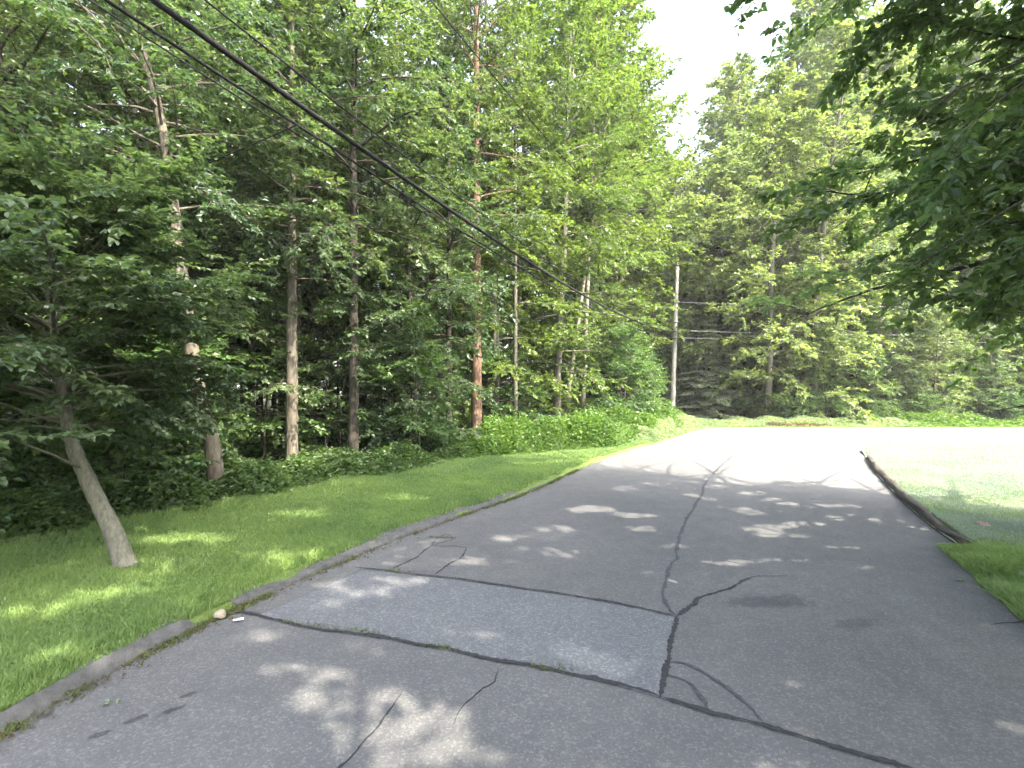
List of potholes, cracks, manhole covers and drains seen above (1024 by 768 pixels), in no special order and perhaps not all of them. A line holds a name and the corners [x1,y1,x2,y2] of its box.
crack [390,534,467,575]
crack [228,609,914,768]
